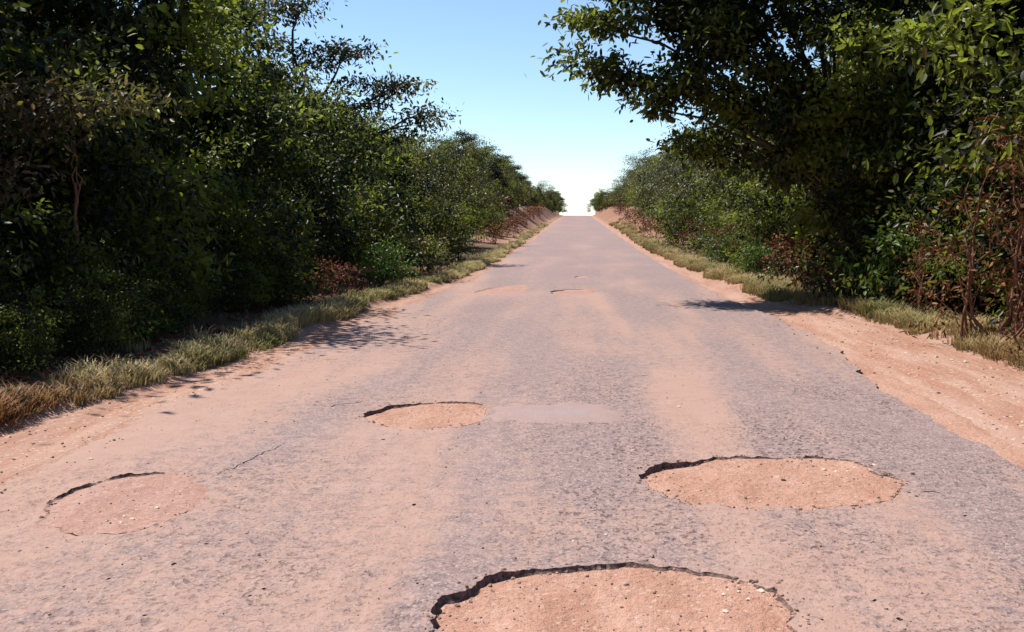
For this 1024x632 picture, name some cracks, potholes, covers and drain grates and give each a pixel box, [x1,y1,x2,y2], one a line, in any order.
pothole [474,285,528,294]
pothole [363,401,488,429]
pothole [639,456,909,511]
pothole [34,472,208,536]
pothole [430,562,797,632]
